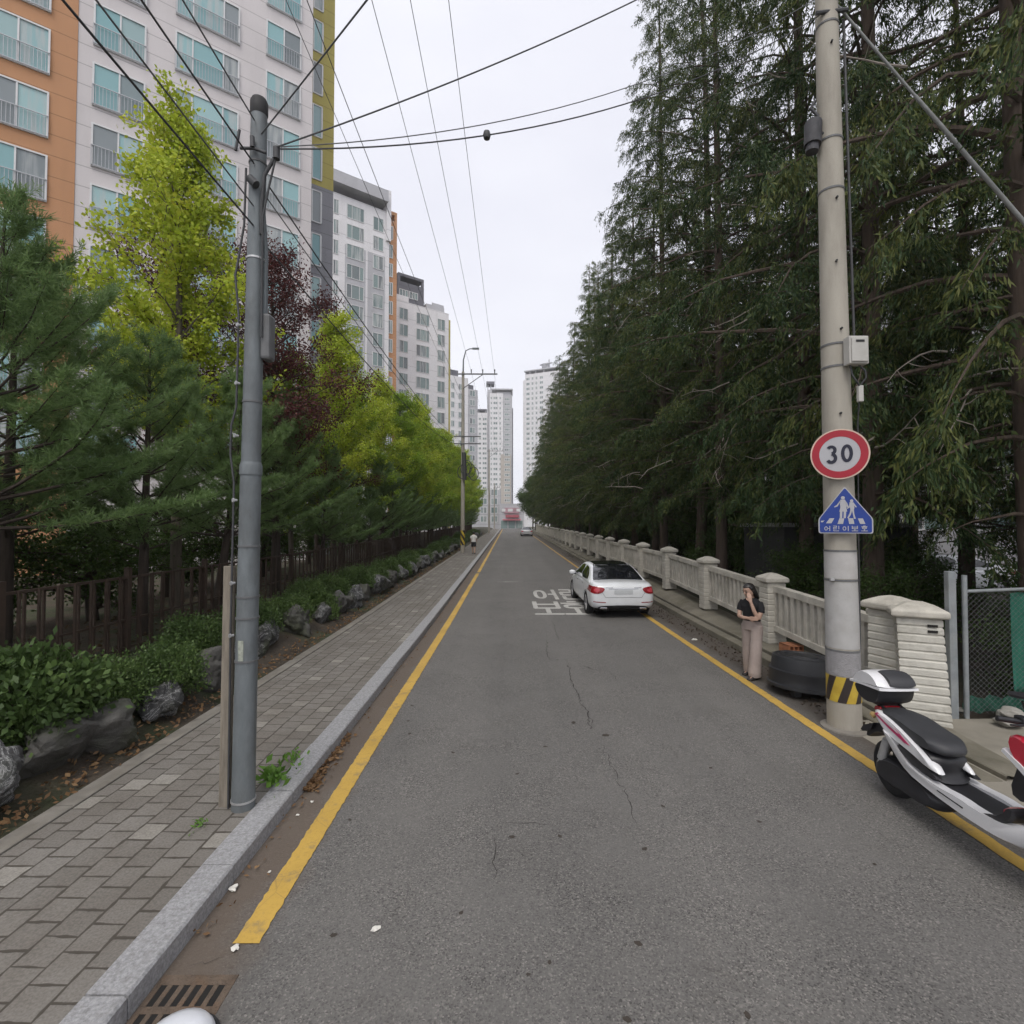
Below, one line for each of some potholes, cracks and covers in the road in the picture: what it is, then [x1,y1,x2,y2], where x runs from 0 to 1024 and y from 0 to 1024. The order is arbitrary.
crack [492,822,543,879]
drain grate [127,975,239,1024]
crack [545,624,616,729]
